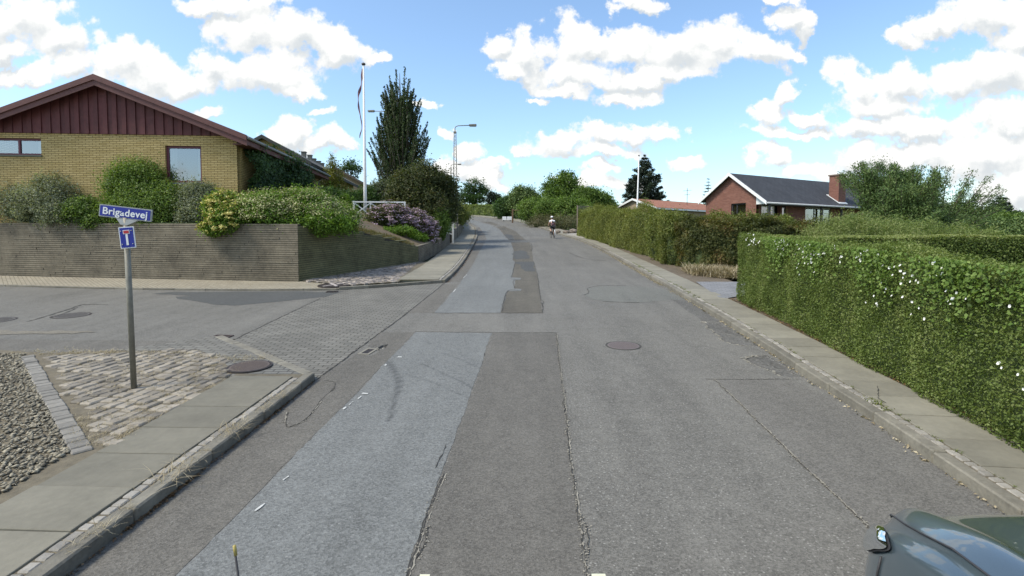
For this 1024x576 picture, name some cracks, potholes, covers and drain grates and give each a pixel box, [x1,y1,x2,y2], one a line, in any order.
manhole cover [226,360,273,374]
manhole cover [605,341,642,350]
crack [285,283,592,576]
